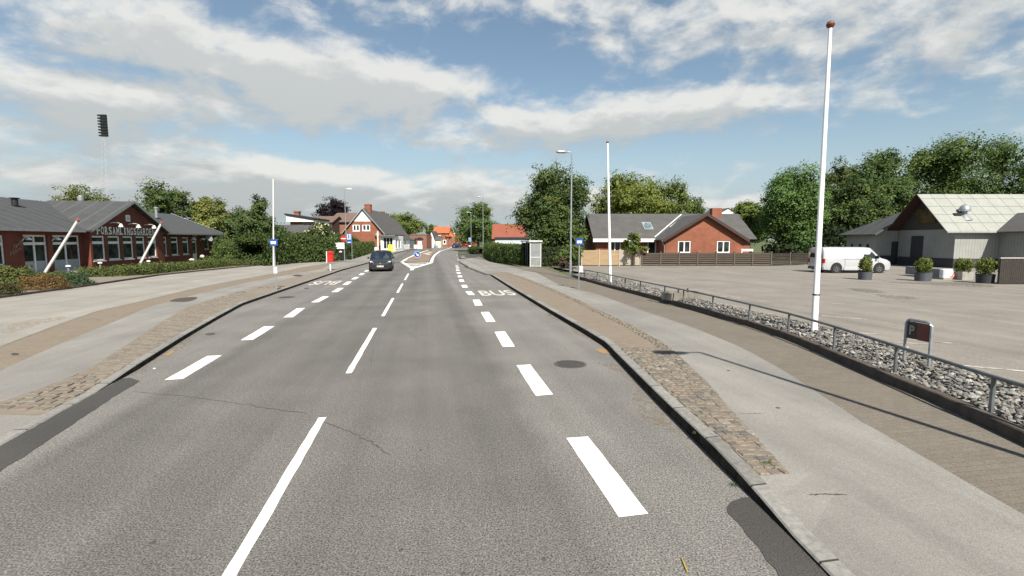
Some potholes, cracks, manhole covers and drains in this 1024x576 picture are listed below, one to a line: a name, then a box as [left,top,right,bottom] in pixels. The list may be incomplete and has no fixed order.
manhole cover [554,360,587,368]
crack [133,391,308,414]
